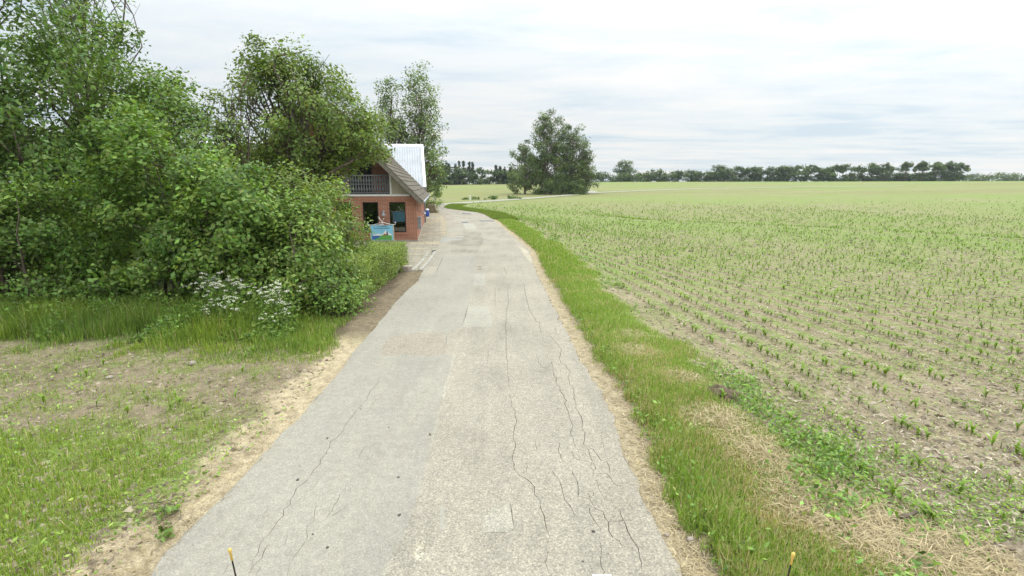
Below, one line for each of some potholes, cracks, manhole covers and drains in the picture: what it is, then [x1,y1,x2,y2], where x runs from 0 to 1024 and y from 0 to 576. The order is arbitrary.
crack [250,380,379,575]
crack [538,338,642,573]
crack [494,268,556,574]
